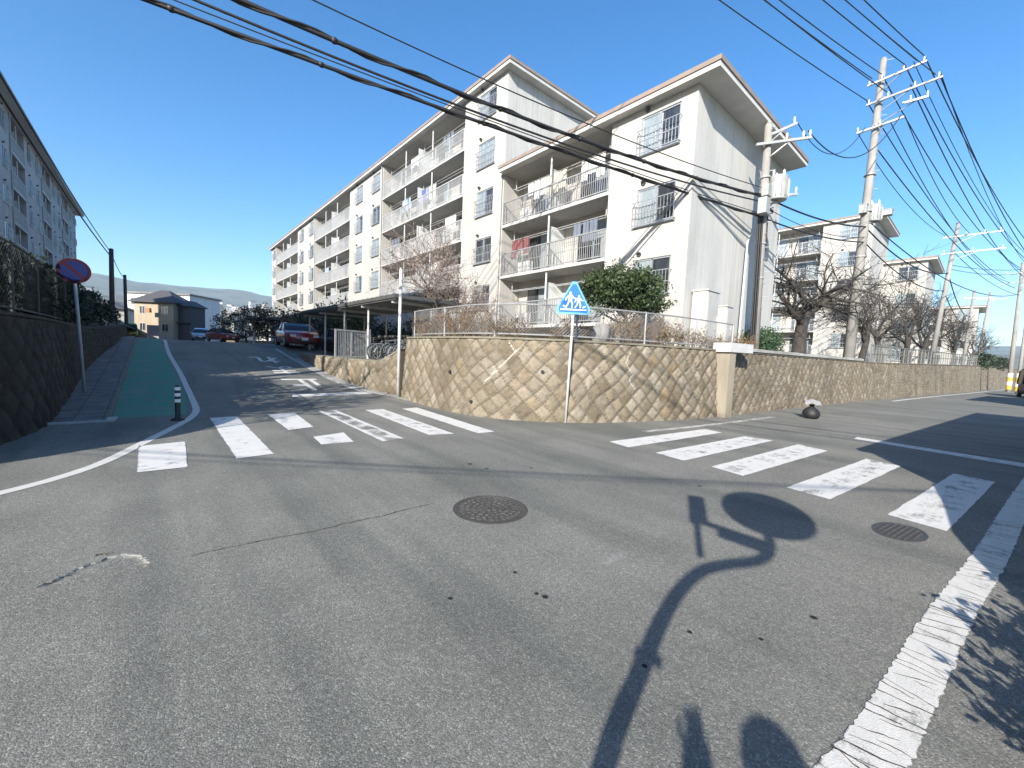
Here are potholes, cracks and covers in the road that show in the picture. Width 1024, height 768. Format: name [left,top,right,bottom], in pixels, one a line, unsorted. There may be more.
manhole cover [453,495,528,524]
crack [187,504,430,557]
